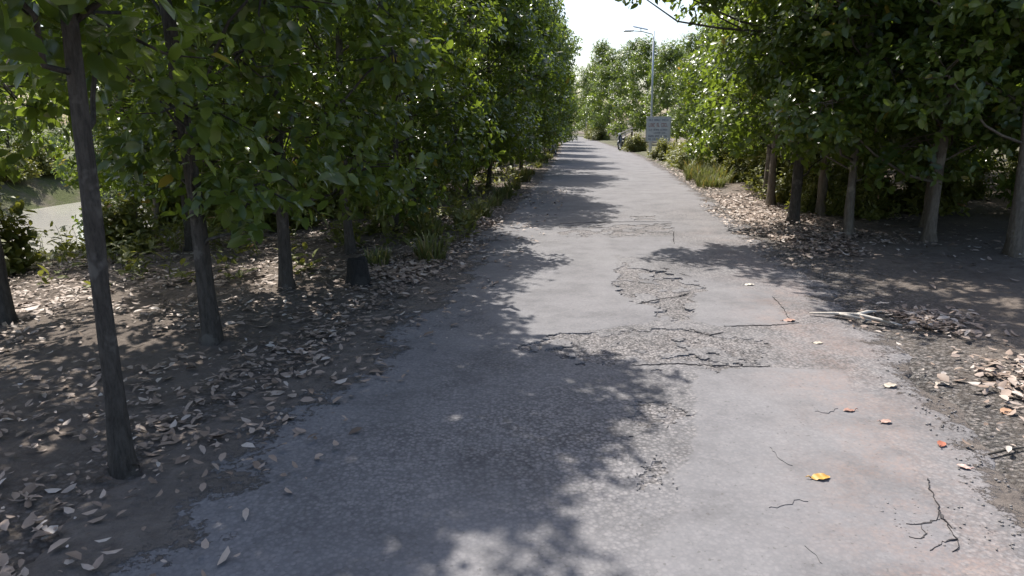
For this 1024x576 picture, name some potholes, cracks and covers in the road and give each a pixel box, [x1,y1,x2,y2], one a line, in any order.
crack [690,296,799,336]
pothole [611,262,708,323]
crack [906,478,959,552]
